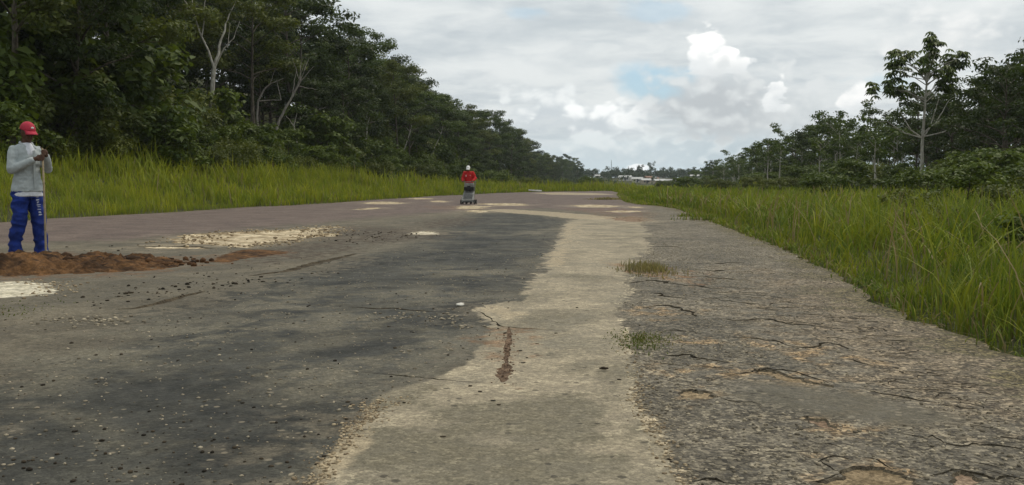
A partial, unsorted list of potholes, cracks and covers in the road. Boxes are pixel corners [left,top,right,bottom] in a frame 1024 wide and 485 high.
crack [625,262,1024,480]
crack [495,327,515,382]
